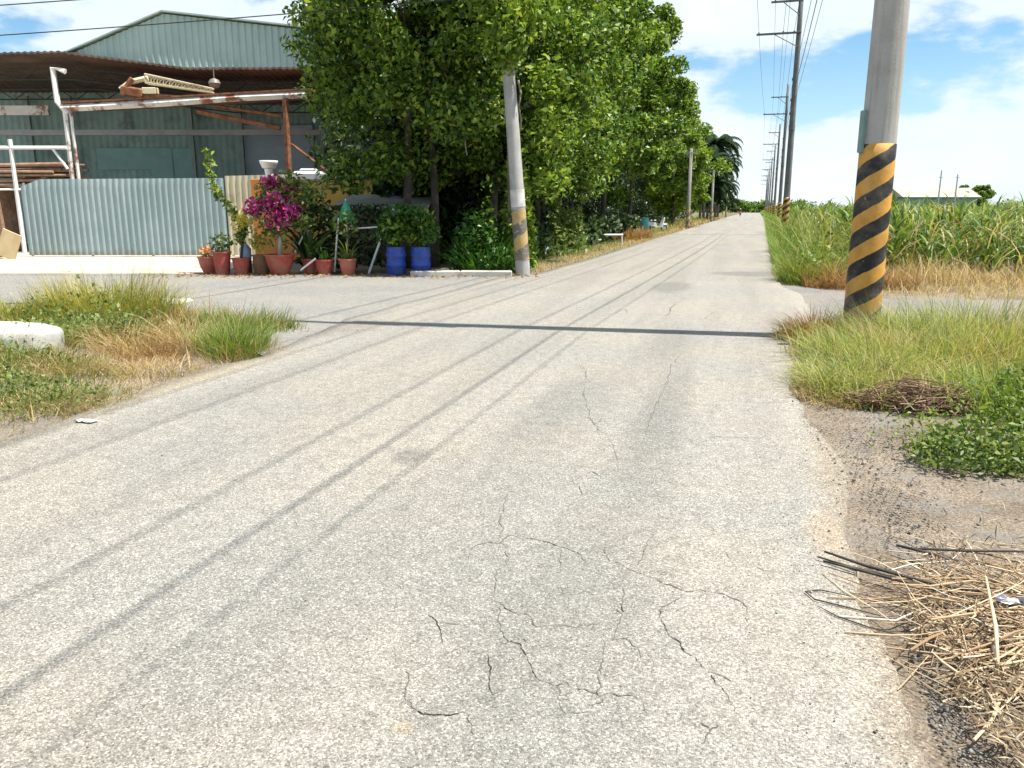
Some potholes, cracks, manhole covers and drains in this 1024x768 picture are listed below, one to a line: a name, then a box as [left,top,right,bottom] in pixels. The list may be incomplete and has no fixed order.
crack [604,531,749,707]
crack [468,488,647,713]
crack [405,671,474,734]
